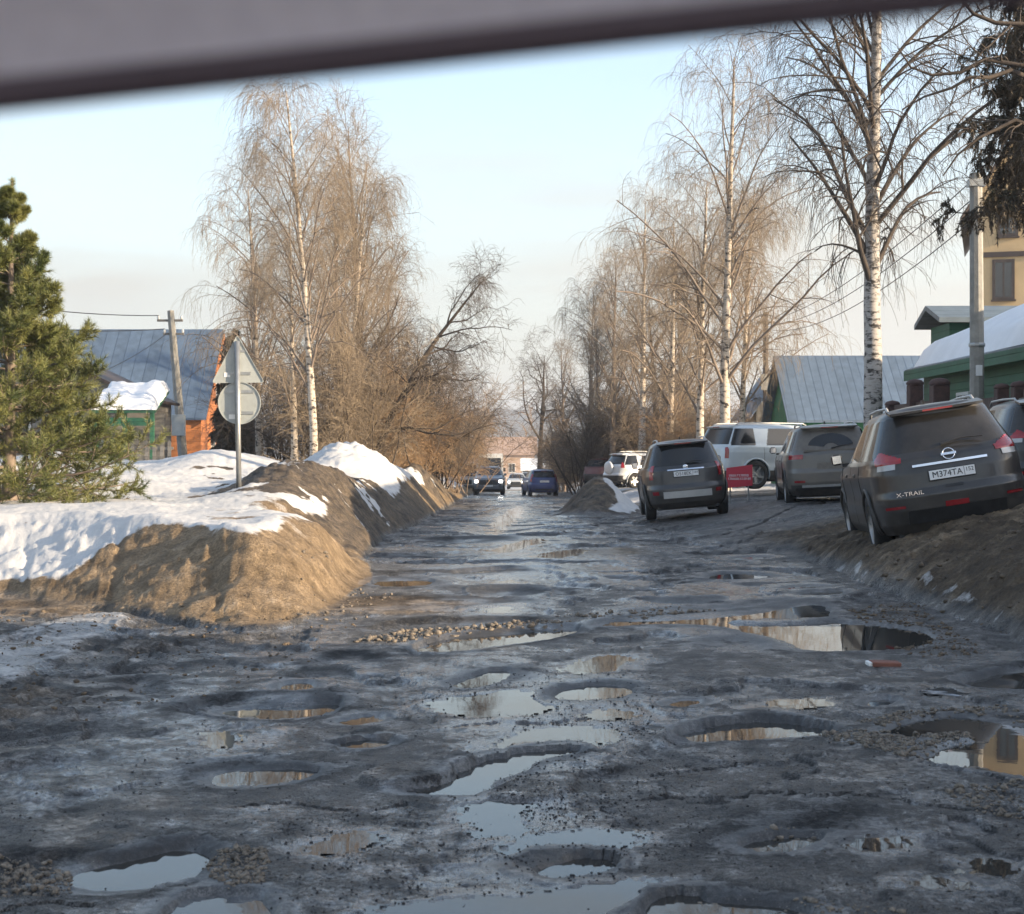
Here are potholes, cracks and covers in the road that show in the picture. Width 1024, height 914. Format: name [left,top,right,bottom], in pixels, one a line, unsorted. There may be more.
pothole [318,713,395,727]
pothole [330,733,408,752]
pothole [0,832,242,901]
pothole [693,802,863,862]
pothole [182,756,343,793]
pothole [398,625,586,655]
pothole [161,688,354,721]
pothole [695,571,784,582]
pothole [616,884,831,914]
pothole [585,597,949,653]
pothole [390,743,594,799]
pothole [873,710,1024,780]
